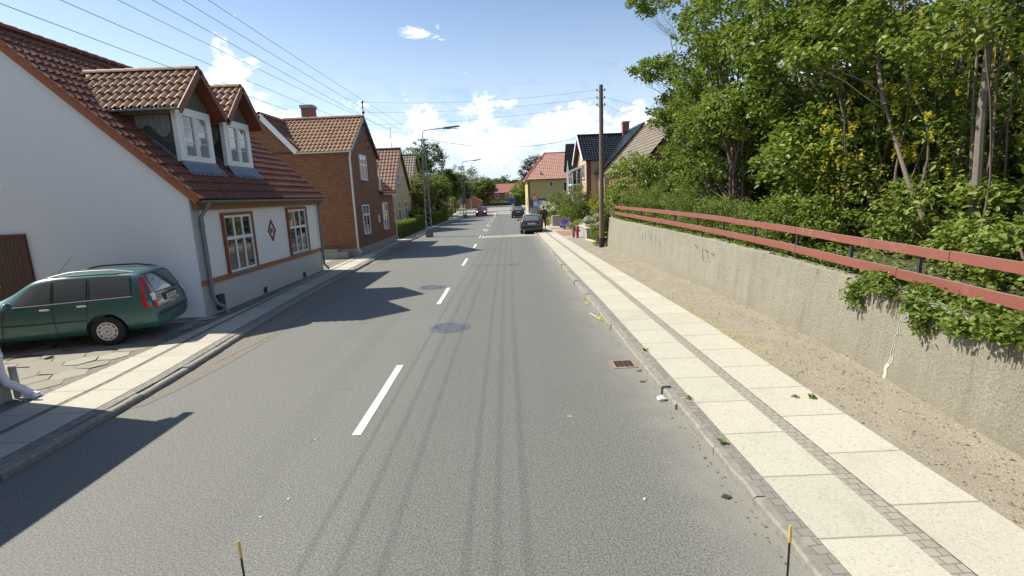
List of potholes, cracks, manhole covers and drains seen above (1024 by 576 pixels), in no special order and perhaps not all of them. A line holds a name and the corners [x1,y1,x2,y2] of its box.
drain grate [607,359,639,369]
manhole cover [429,322,472,333]
